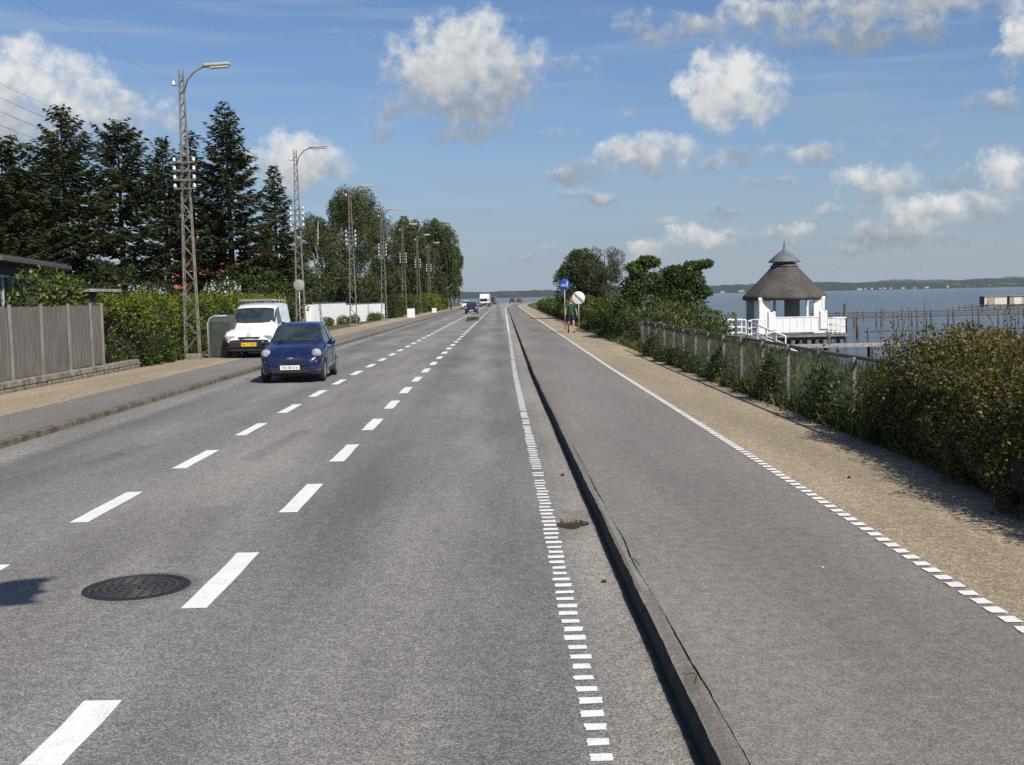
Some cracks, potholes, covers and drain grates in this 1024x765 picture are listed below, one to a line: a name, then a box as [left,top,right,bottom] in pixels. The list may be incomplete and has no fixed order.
pothole [555,518,586,529]
manhole cover [71,572,201,604]
crack [574,448,718,708]
